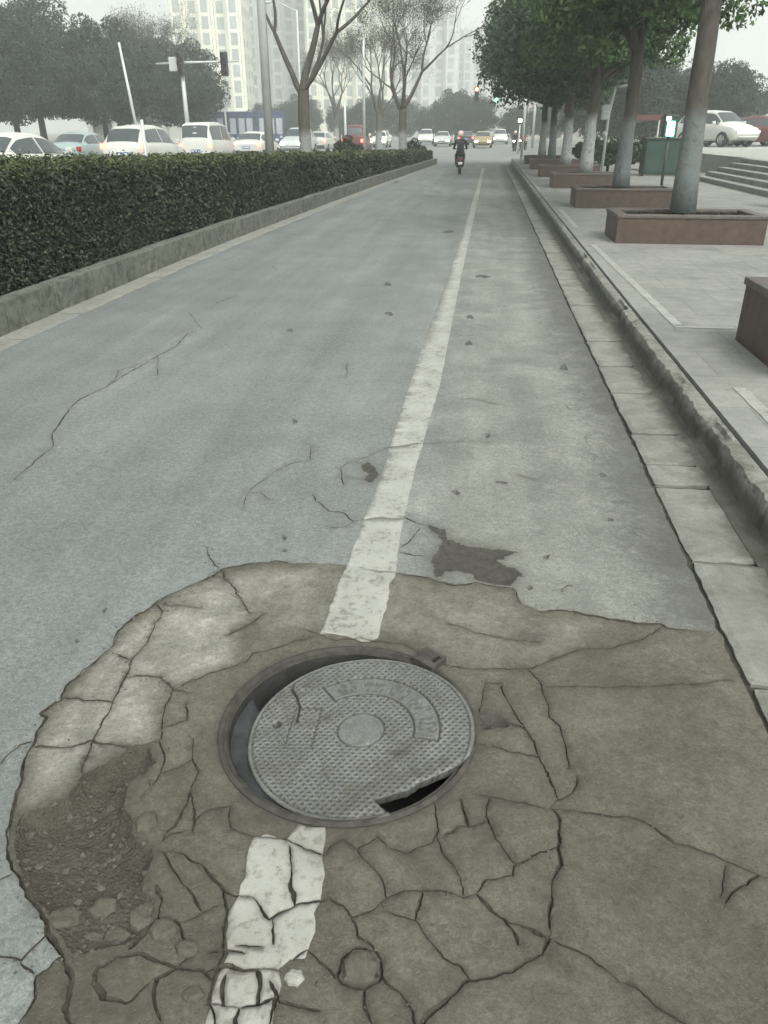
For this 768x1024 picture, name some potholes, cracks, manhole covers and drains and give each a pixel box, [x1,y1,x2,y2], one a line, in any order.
manhole cover [248,659,475,820]
pothole [14,747,157,956]
crack [312,494,423,556]
pothole [361,462,378,482]
crack [0,560,767,1024]
crack [14,314,199,480]
